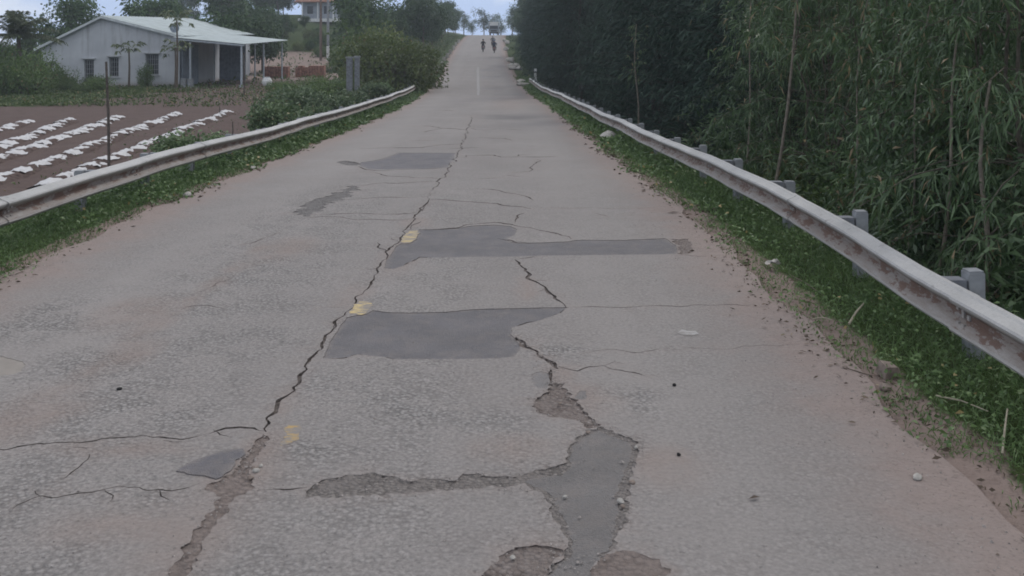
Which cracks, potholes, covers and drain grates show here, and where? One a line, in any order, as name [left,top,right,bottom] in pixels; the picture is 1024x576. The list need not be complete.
pothole [532,383,601,428]
crack [0,110,783,510]
pothole [590,550,671,576]
